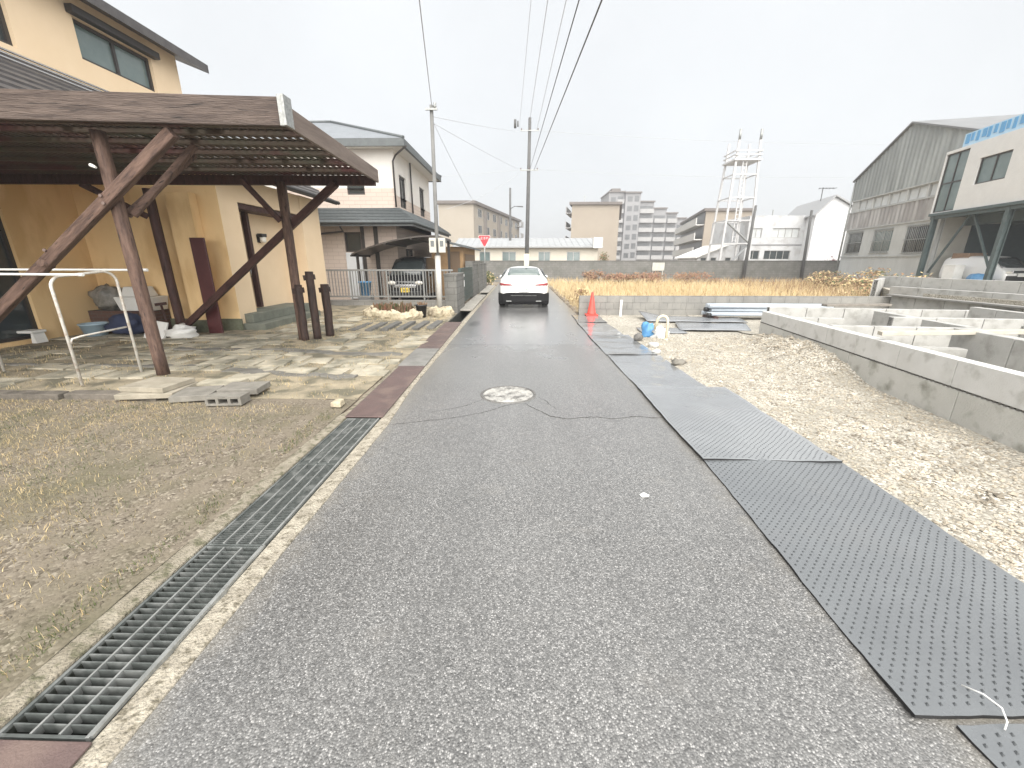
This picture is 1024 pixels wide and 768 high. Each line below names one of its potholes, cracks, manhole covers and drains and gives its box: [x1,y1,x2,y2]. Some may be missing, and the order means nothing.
crack [390,397,661,425]
drain grate [298,418,379,465]
drain grate [0,545,262,742]
drain grate [207,463,338,547]
manhole cover [480,386,536,404]
